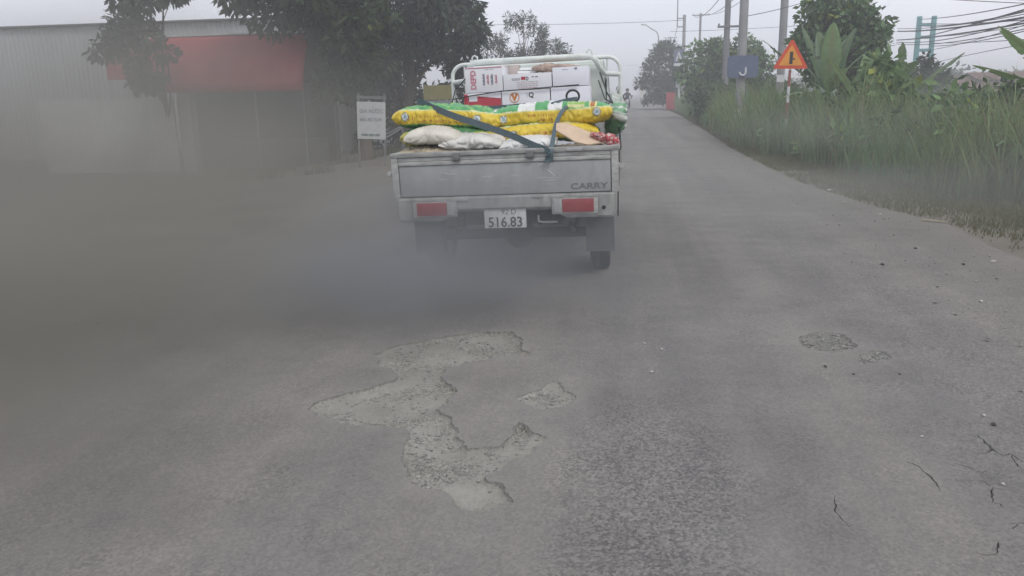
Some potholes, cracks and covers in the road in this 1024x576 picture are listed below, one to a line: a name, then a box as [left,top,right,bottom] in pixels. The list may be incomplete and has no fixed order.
pothole [798,332,858,353]
pothole [516,381,577,409]
pothole [307,331,548,512]
pothole [854,350,892,364]
crack [956,434,1024,556]
